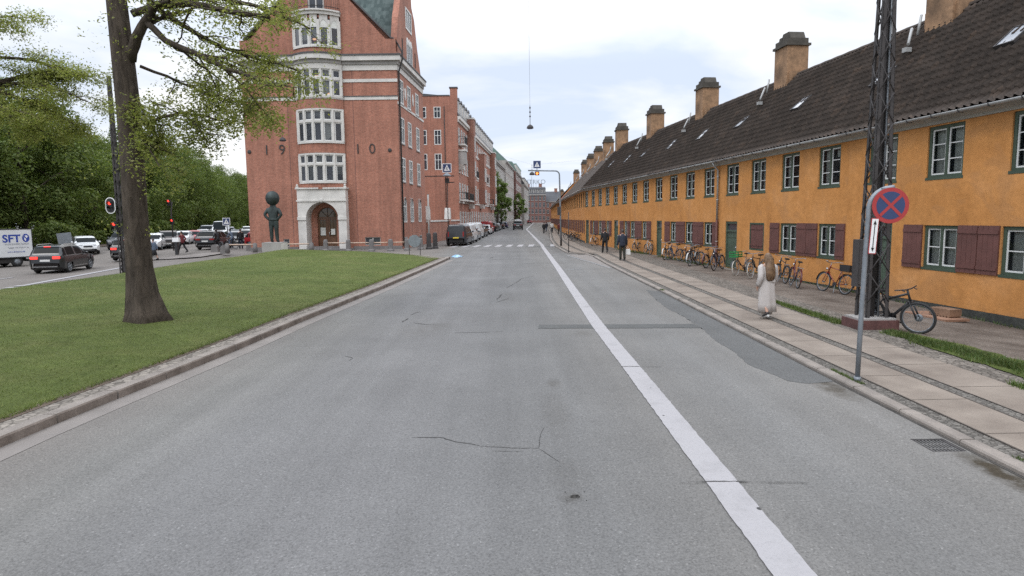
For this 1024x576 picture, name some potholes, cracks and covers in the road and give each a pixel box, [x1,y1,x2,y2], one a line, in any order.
crack [420,428,558,461]
drain grate [911,439,965,452]
